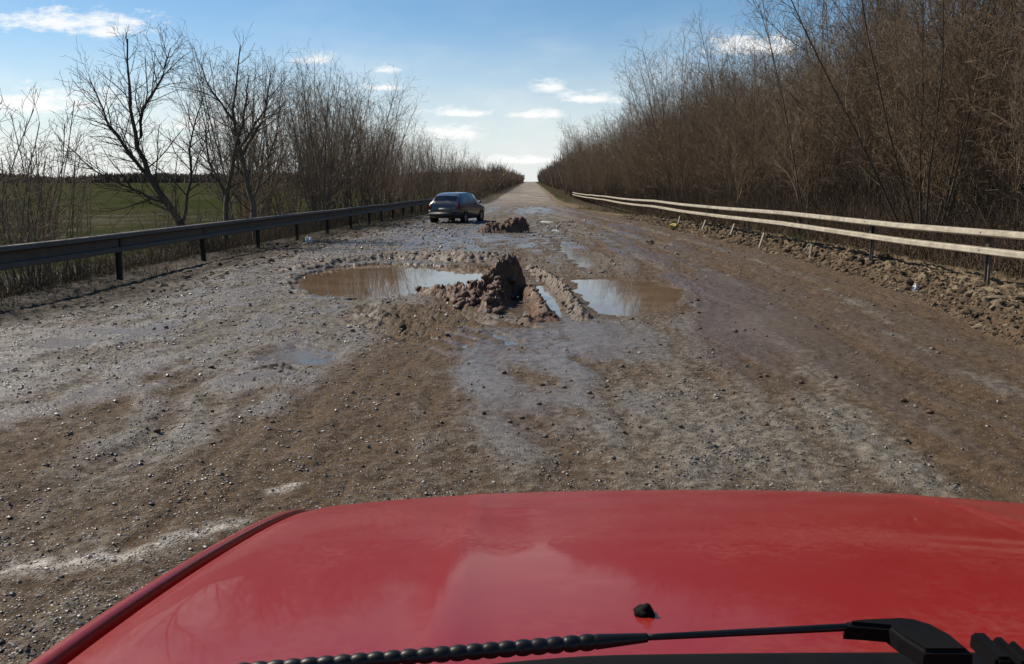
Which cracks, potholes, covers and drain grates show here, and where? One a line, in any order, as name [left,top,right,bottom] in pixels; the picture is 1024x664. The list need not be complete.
pothole [284,260,494,300]
pothole [533,282,567,318]
pothole [562,275,698,318]
pothole [241,339,358,366]
